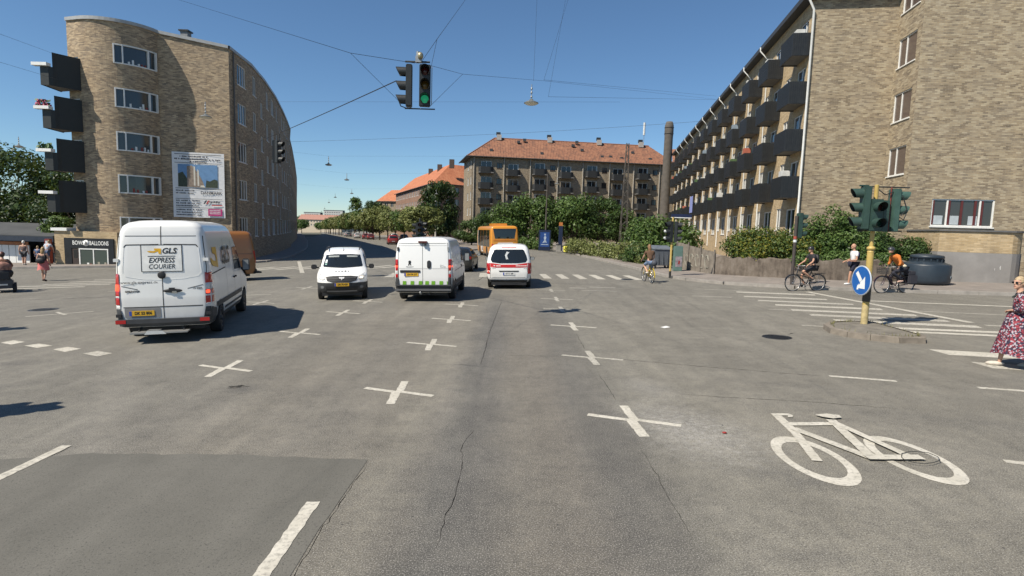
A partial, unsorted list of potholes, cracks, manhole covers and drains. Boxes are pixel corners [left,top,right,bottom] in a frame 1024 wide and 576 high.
crack [436,429,475,547]
